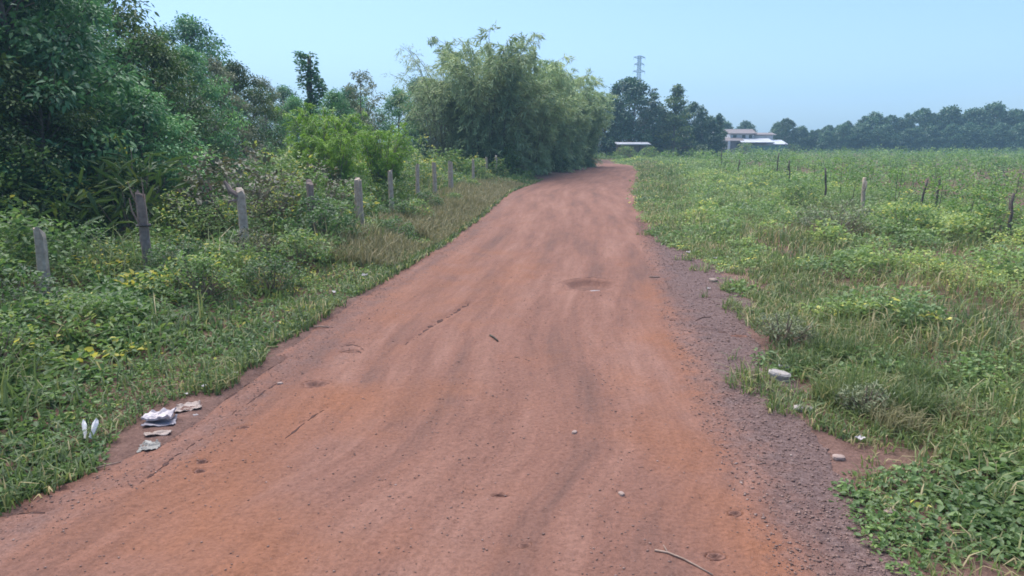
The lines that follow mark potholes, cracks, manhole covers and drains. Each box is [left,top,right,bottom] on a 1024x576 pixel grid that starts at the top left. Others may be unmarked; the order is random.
crack [271,410,324,454]
pothole [560,277,620,292]
pothole [705,553,726,561]
pothole [302,380,330,388]
crack [405,303,469,345]
